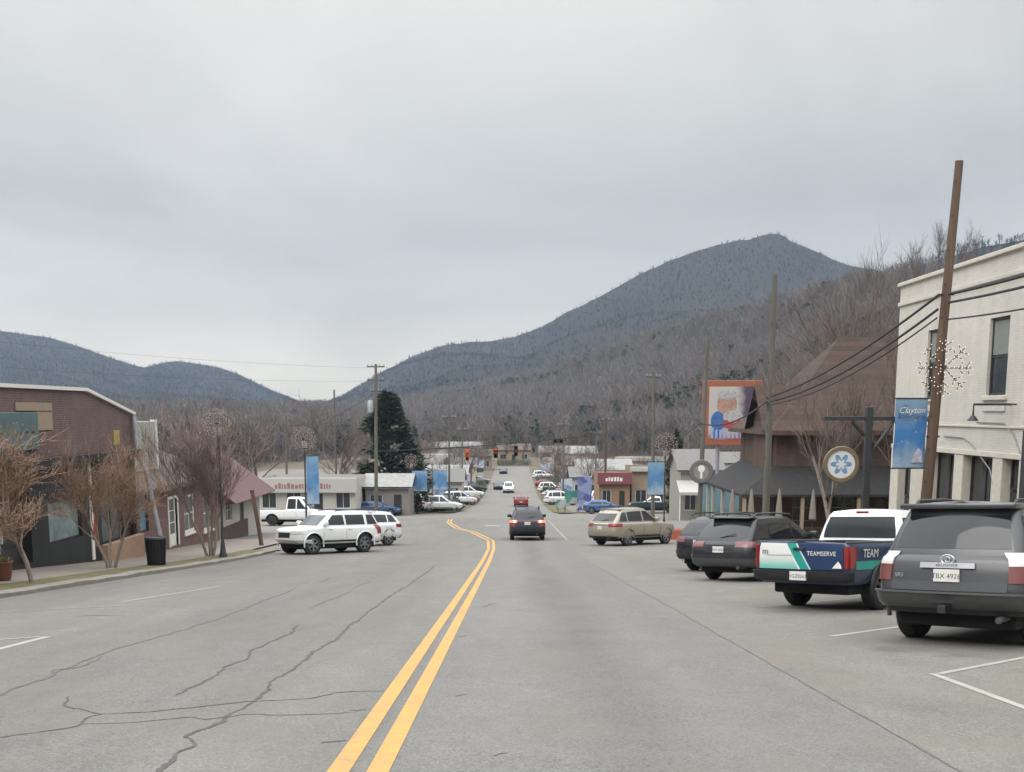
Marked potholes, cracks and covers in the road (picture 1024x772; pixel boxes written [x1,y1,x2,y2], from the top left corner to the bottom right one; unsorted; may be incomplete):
crack [0,566,434,772]
